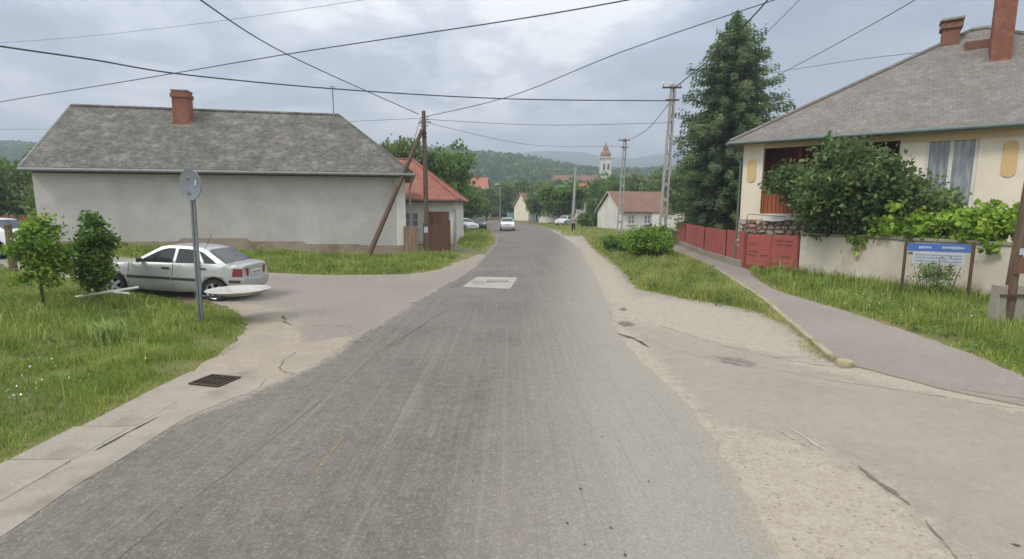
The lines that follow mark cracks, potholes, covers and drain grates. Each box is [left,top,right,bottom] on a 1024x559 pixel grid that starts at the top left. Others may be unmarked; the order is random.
crack [547,295,1022,409]
crack [117,325,421,559]
drain grate [188,374,241,387]
